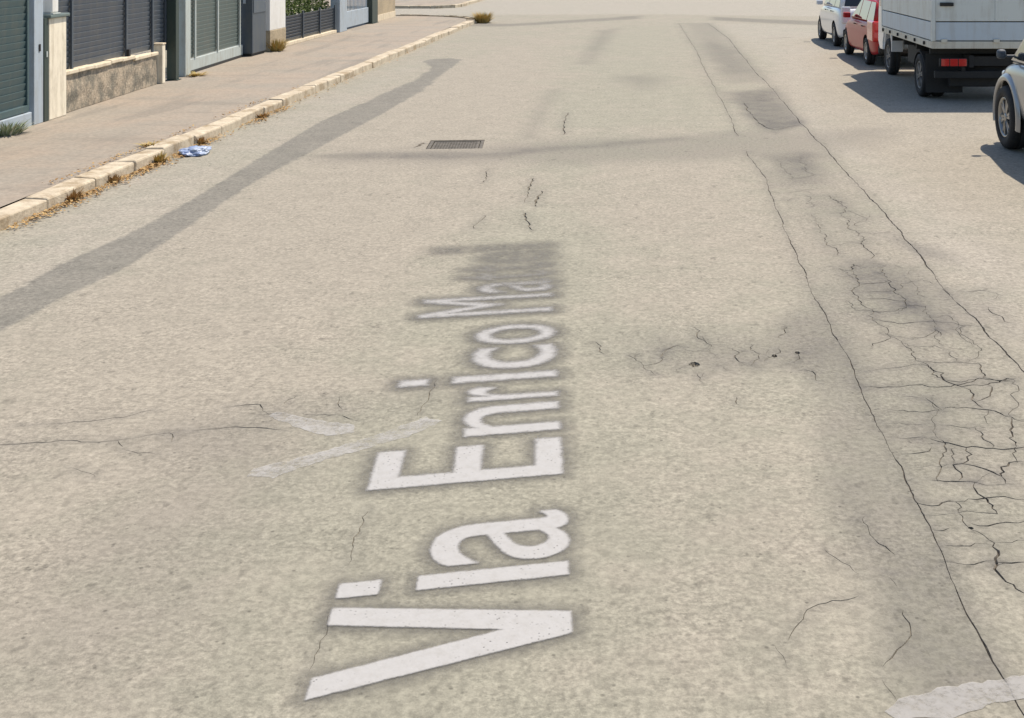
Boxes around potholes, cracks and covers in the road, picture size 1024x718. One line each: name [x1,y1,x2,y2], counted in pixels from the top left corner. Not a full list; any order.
crack [679,24,1024,716]
crack [0,397,353,454]
crack [524,178,543,231]
